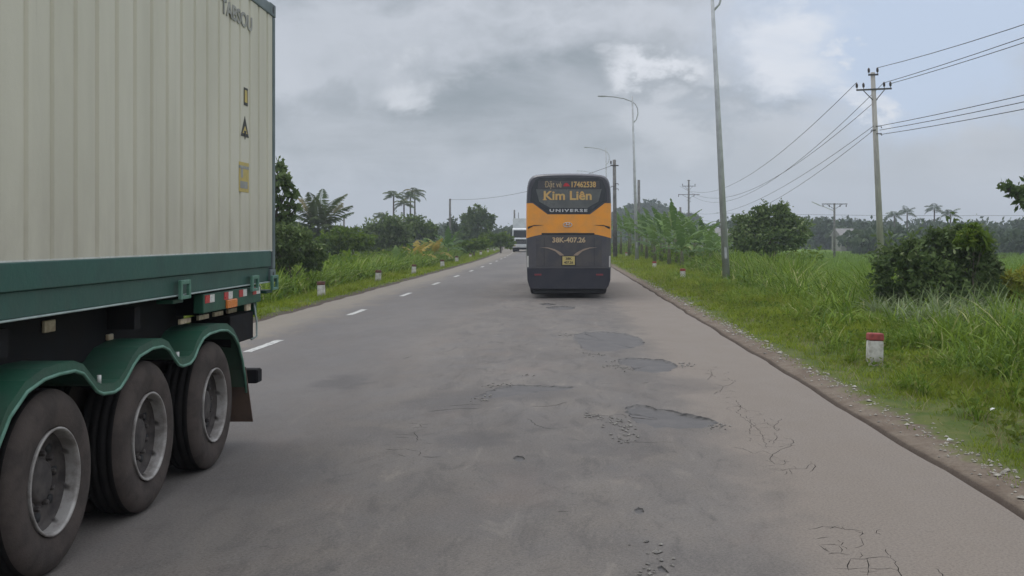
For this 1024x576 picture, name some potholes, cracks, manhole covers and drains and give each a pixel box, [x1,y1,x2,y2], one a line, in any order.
pothole [602,358,696,373]
pothole [584,404,731,443]
crack [814,526,902,576]
crack [386,404,476,458]
pothole [556,331,645,357]
crack [681,366,816,475]
pothole [470,374,574,402]
